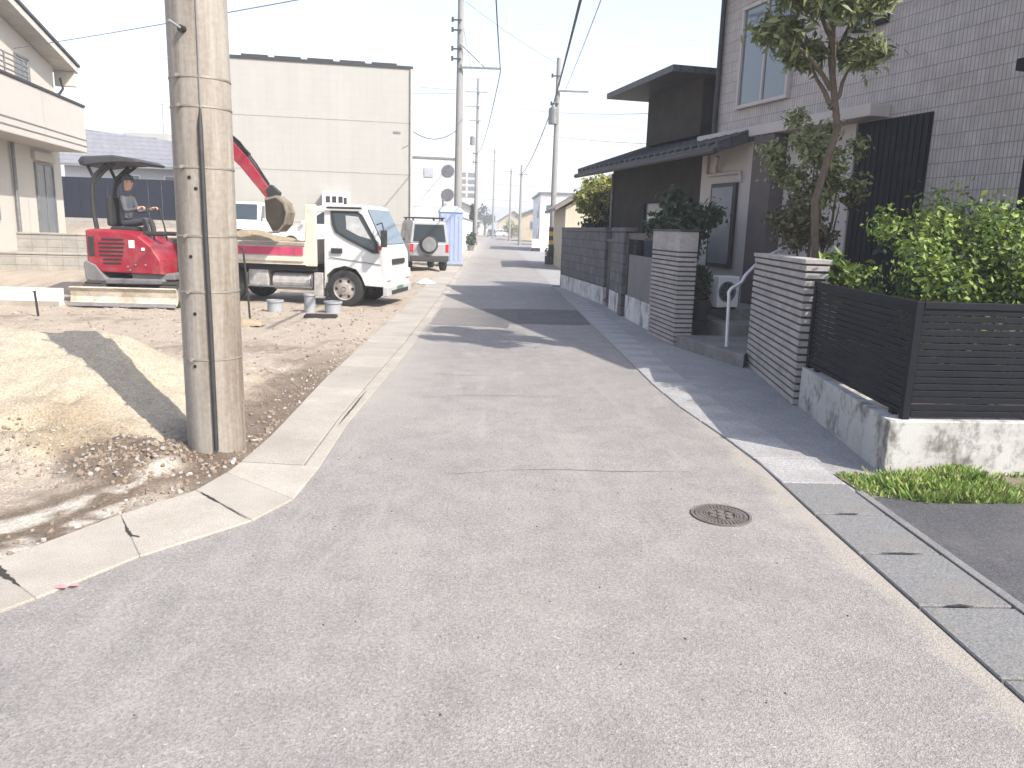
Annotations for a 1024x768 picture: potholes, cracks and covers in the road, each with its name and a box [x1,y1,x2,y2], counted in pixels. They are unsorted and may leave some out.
manhole cover [691,504,752,527]
